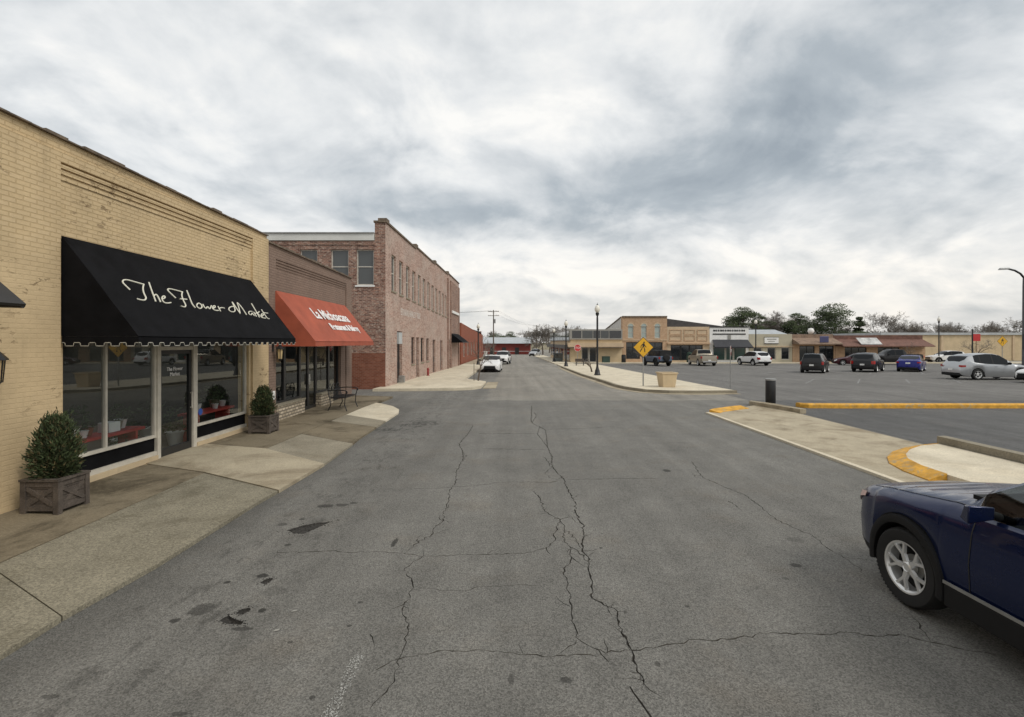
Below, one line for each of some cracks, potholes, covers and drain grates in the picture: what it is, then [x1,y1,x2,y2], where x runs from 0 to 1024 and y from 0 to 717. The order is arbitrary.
crack [277,409,1001,717]
